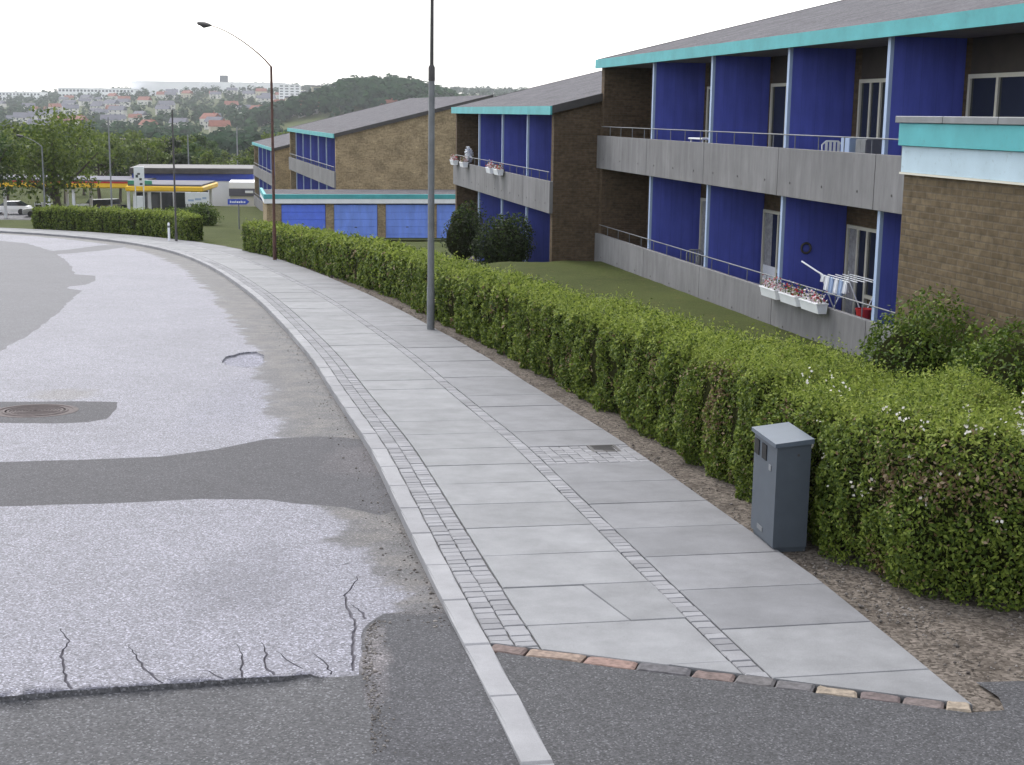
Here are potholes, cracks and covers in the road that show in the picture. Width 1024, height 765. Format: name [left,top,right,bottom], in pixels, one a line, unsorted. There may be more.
crack [128,646,164,683]
crack [262,563,367,675]
crack [199,645,245,679]
crack [59,629,73,689]
manhole cover [0,404,79,418]
